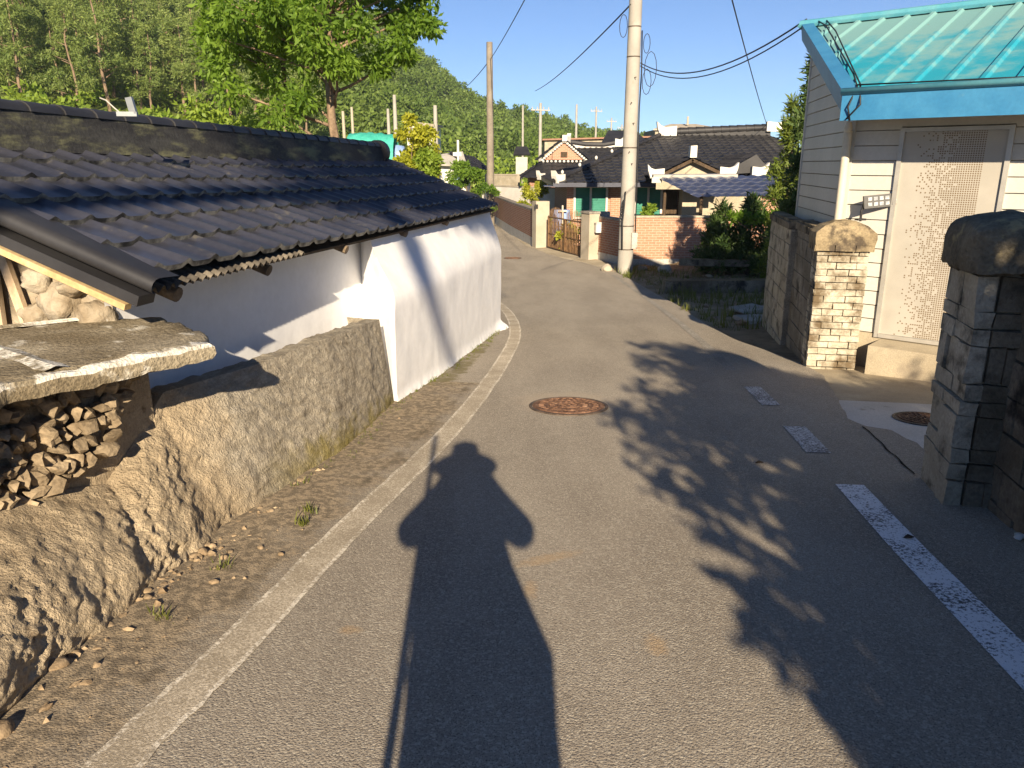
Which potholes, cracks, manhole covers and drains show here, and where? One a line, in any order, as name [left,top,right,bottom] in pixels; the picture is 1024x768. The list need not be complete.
manhole cover [529,397,608,416]
manhole cover [892,411,931,426]
crack [862,426,915,474]
